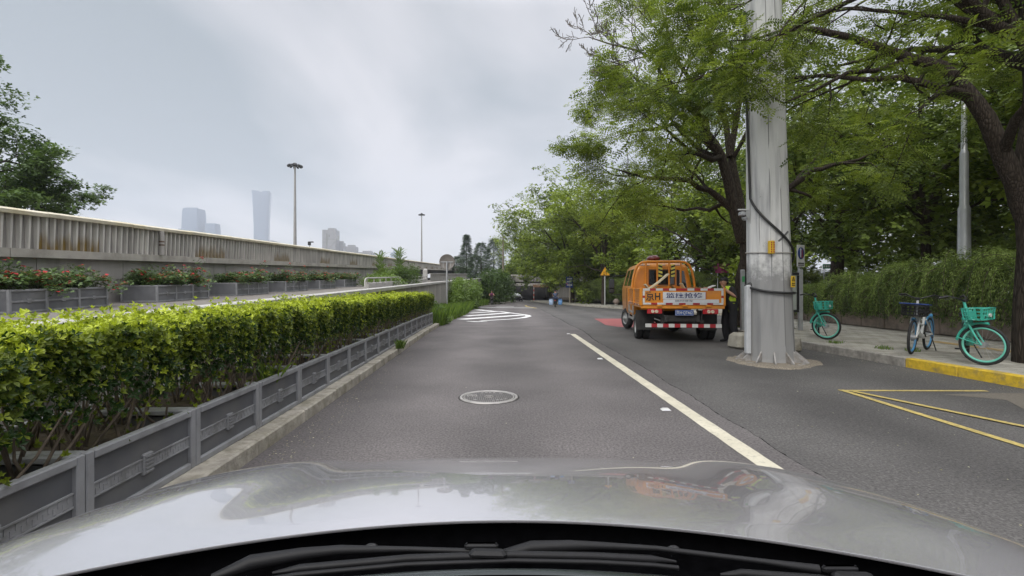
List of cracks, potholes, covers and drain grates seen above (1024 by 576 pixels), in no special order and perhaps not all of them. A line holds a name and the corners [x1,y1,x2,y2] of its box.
manhole cover [458,390,520,405]
